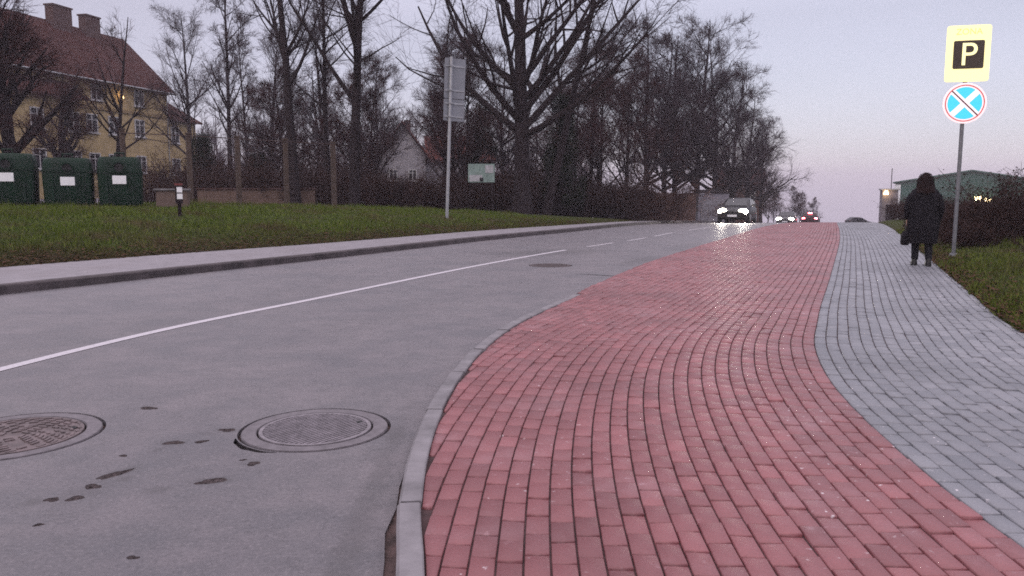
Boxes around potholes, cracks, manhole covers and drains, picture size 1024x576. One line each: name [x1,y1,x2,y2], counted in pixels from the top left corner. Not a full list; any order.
manhole cover [0,413,105,461]
manhole cover [238,409,390,453]
